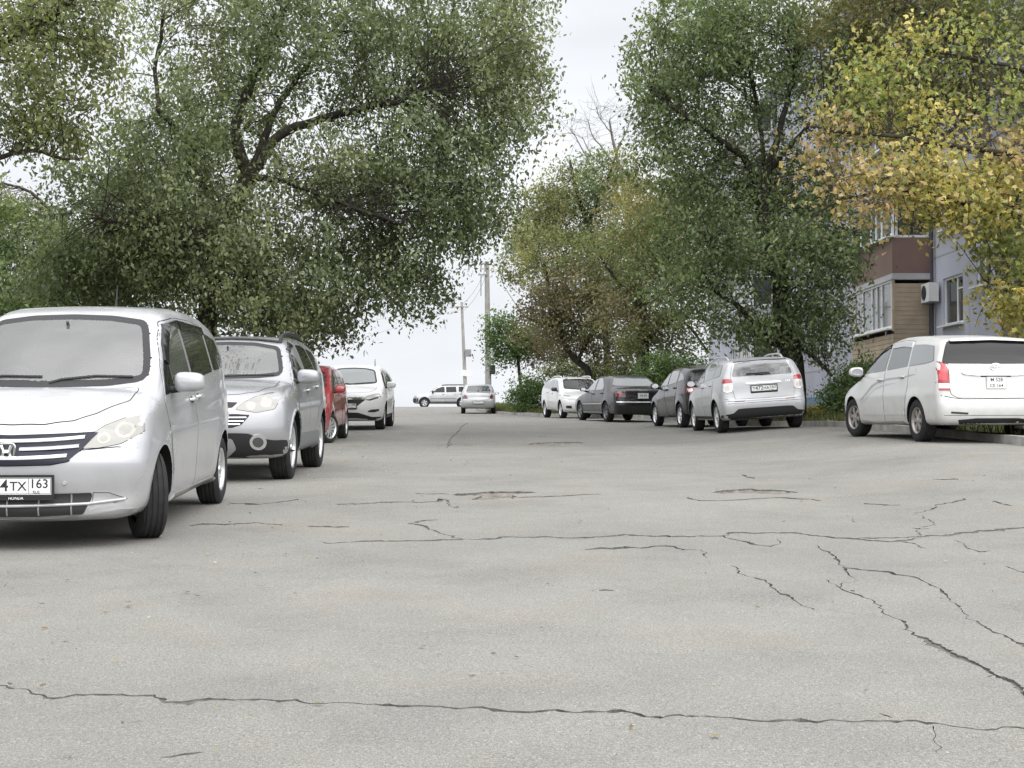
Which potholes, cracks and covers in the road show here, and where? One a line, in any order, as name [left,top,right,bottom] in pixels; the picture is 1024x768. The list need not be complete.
crack [0,685,1024,753]
crack [308,493,1024,696]
pothole [452,491,537,500]
